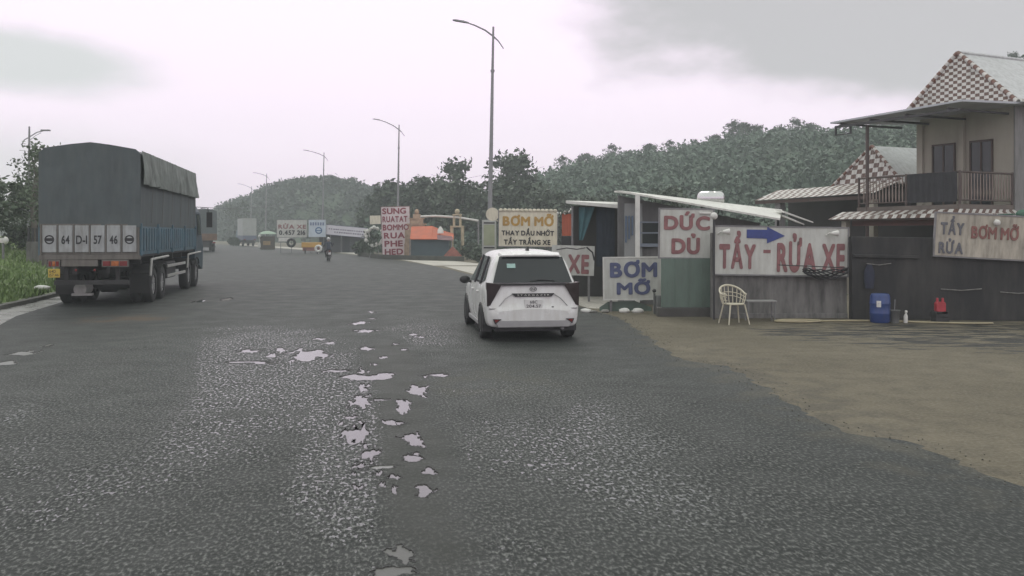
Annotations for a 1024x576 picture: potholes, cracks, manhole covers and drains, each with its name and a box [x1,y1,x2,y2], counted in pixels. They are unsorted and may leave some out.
pothole [359,448,383,464]
pothole [394,430,427,448]
pothole [413,483,439,498]
pothole [338,419,371,445]
pothole [281,347,336,362]
pothole [347,394,373,410]
pothole [420,466,439,475]
pothole [404,384,431,398]
pothole [395,398,413,415]
pothole [400,451,427,462]
pothole [367,565,419,576]
pothole [337,372,398,381]
